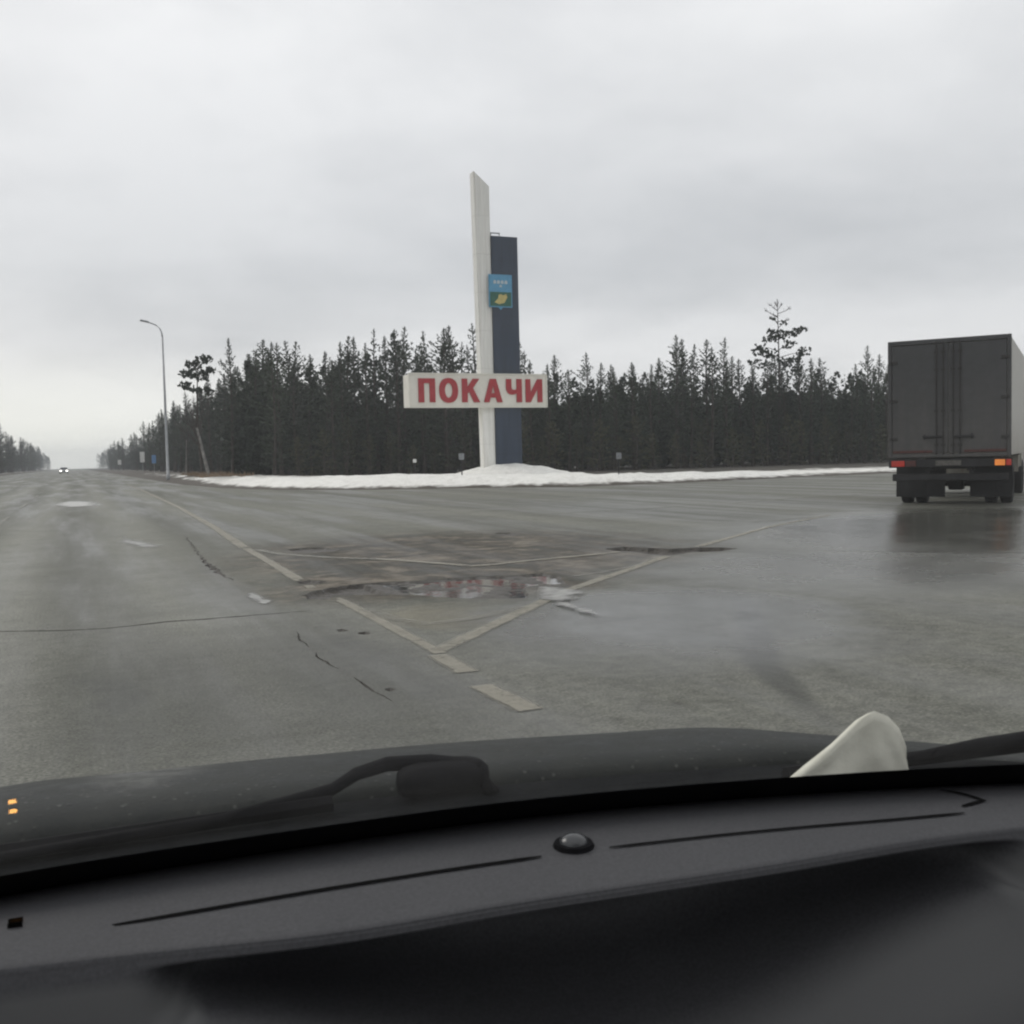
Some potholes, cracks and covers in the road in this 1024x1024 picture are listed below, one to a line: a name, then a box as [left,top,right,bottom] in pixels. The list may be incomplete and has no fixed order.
pothole [300,573,566,600]
crack [297,632,410,717]
crack [184,534,233,580]
